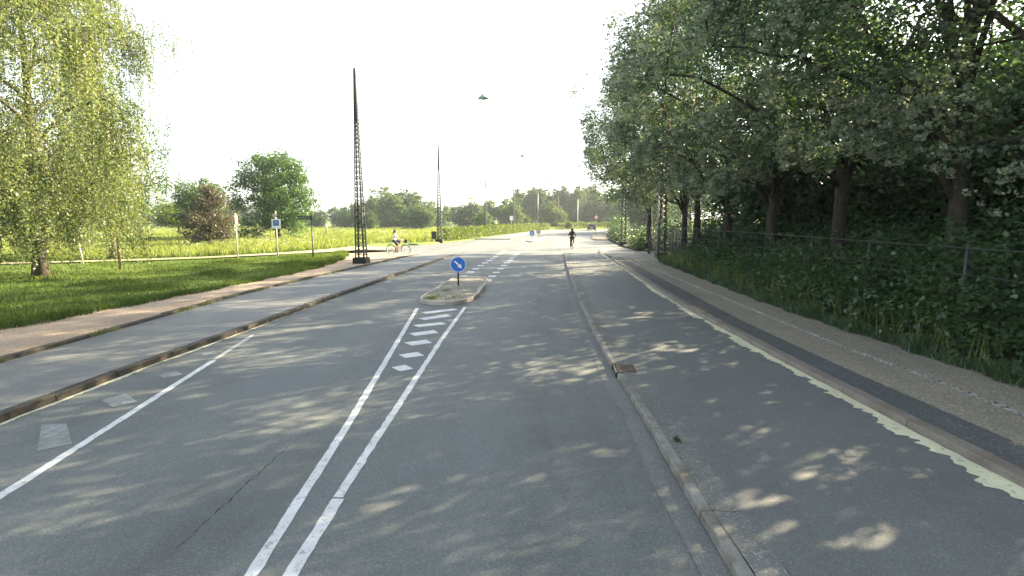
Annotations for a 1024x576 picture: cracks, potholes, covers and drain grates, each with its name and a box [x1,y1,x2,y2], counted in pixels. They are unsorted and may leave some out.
crack [167,441,295,559]
manhole cover [614,364,637,373]
